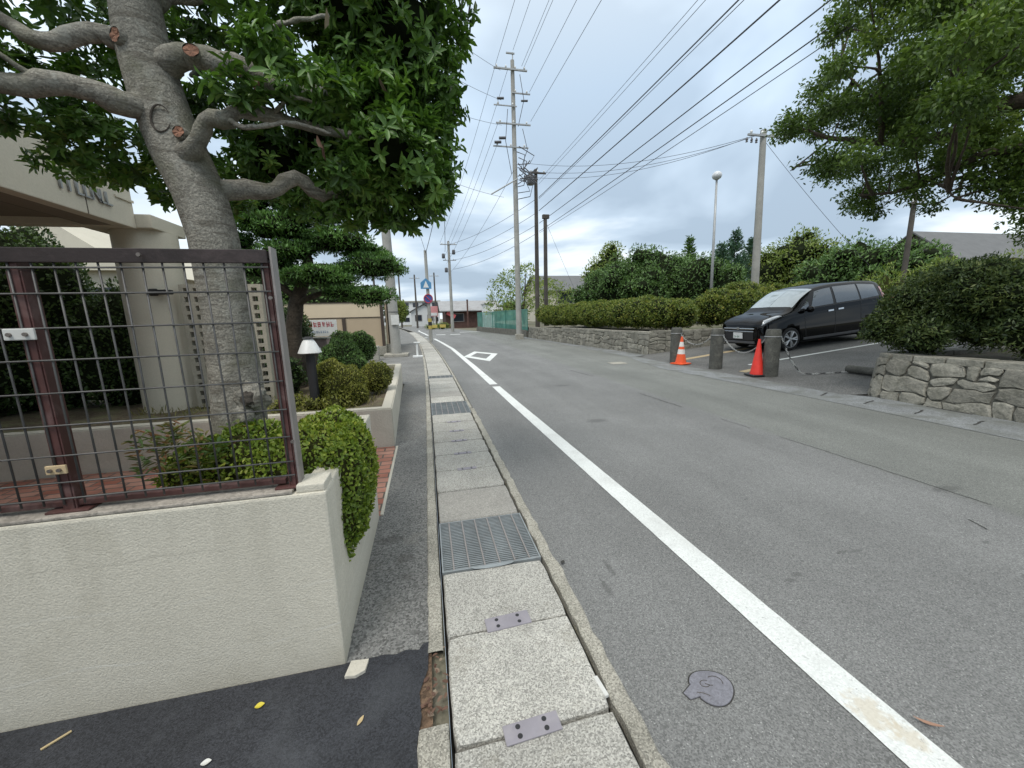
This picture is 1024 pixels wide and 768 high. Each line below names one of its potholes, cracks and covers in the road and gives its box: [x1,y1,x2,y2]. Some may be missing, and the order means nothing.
manhole cover [682,670,735,707]
drain grate [431,401,471,416]
drain grate [439,513,541,578]
crack [782,437,991,505]
